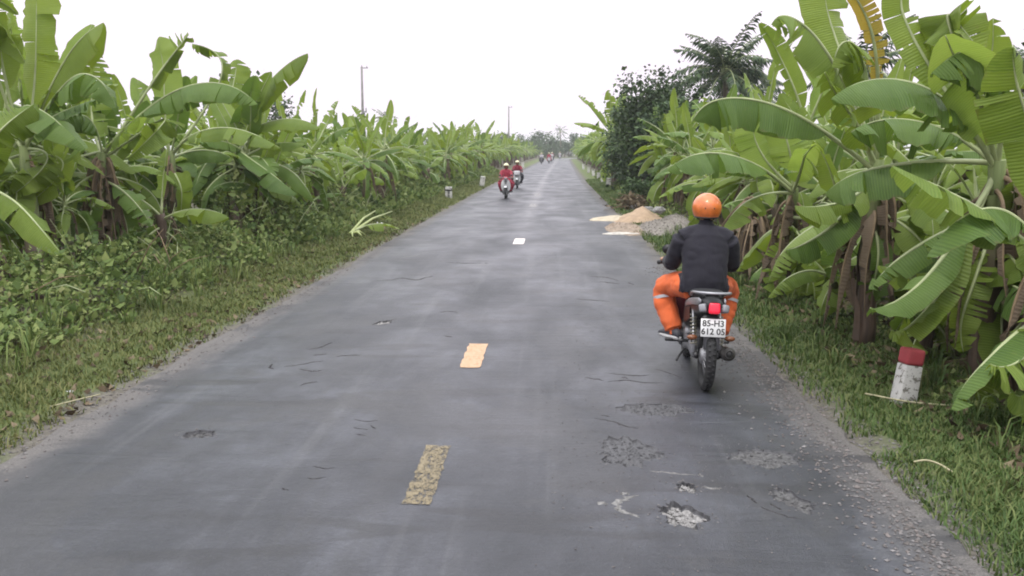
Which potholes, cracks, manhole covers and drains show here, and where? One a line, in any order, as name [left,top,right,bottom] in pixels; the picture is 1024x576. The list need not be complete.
crack [585,369,682,383]
pothole [768,487,816,515]
crack [595,415,635,428]
pothole [615,403,695,417]
pothole [728,448,800,470]
crack [268,342,354,385]
pothole [656,501,711,531]
pothole [182,430,217,438]
pothole [599,435,665,468]
pothole [676,482,697,494]
